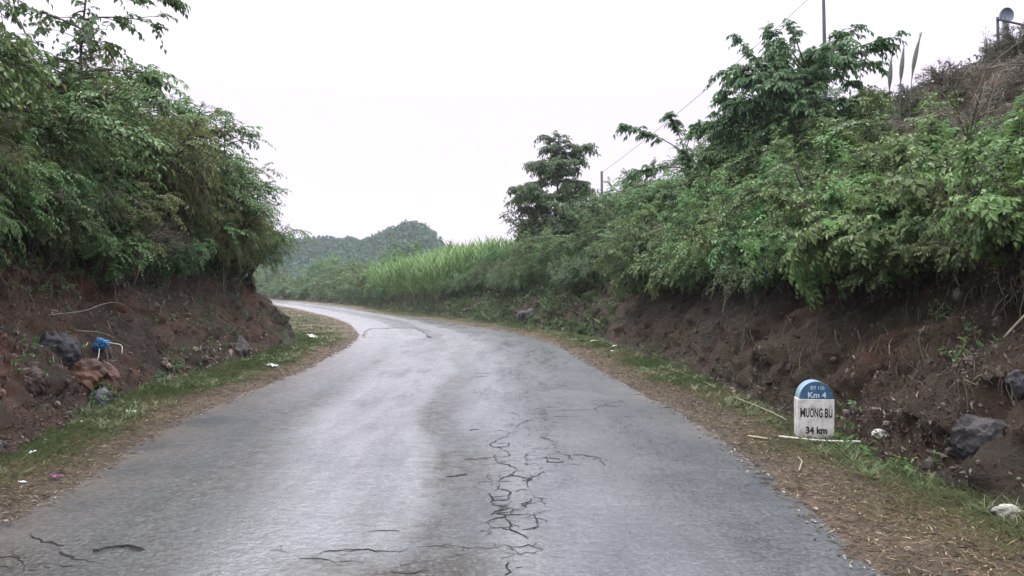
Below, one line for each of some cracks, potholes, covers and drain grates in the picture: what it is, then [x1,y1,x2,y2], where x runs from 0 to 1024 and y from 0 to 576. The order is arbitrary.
crack [270,412,606,575]
crack [0,535,90,572]
